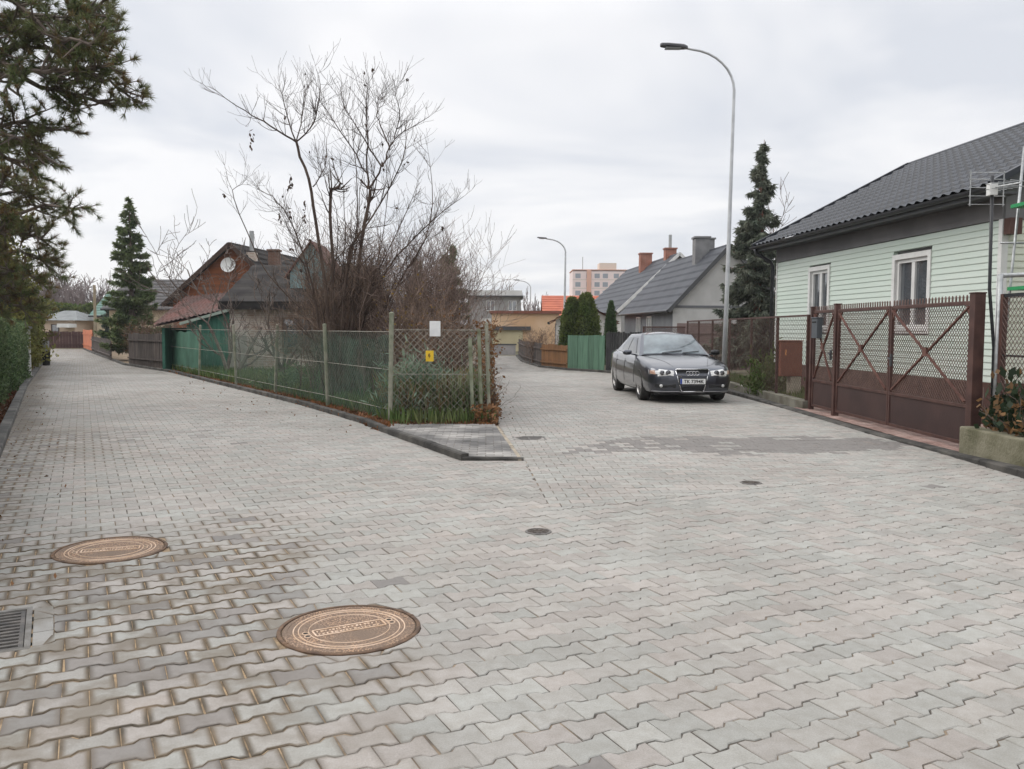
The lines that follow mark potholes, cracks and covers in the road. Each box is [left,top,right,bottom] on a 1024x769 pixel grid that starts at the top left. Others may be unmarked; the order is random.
manhole cover [50,536,168,565]
drain grate [0,607,33,653]
manhole cover [276,605,420,656]
